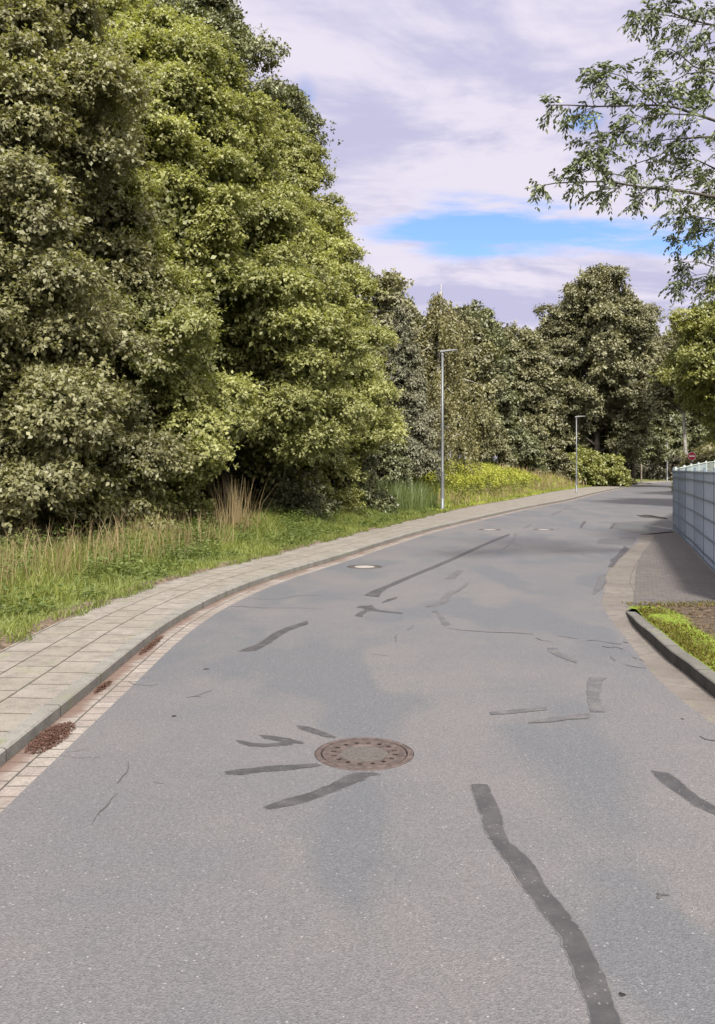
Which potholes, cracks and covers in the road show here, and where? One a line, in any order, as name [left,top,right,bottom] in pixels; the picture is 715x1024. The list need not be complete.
manhole cover [315,737,414,771]
crack [563,636,644,668]
